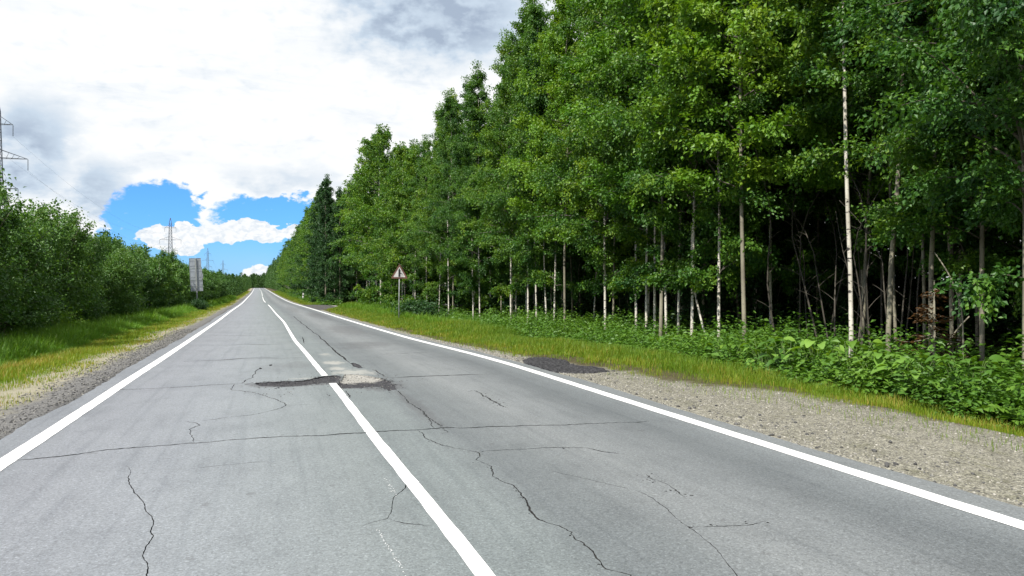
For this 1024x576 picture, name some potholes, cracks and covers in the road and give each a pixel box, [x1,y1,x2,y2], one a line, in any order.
pothole [245,374,346,389]
crack [23,370,770,576]
pothole [335,374,403,391]
crack [104,335,310,442]
